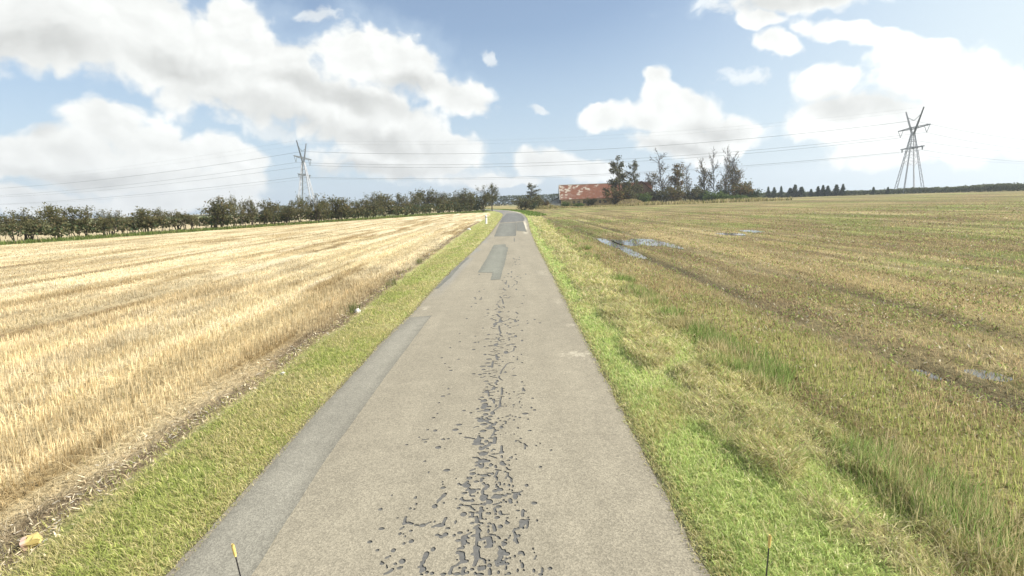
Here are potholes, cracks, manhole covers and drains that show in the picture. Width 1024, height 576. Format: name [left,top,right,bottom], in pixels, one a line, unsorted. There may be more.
crack [460,238,526,292]
